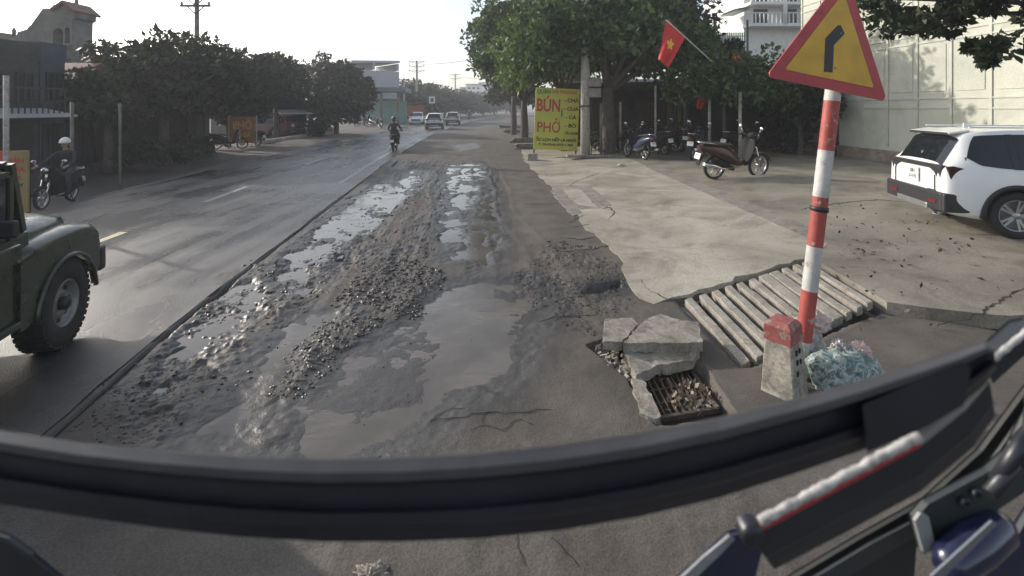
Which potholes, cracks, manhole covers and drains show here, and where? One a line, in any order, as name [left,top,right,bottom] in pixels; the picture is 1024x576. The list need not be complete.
pothole [277,276,560,459]
pothole [123,279,263,402]
pothole [584,280,620,294]
crack [937,289,1022,326]
crack [429,408,550,431]
pothole [168,309,338,447]
pothole [431,162,508,266]
pothole [394,169,434,209]
drain grate [645,369,720,423]
